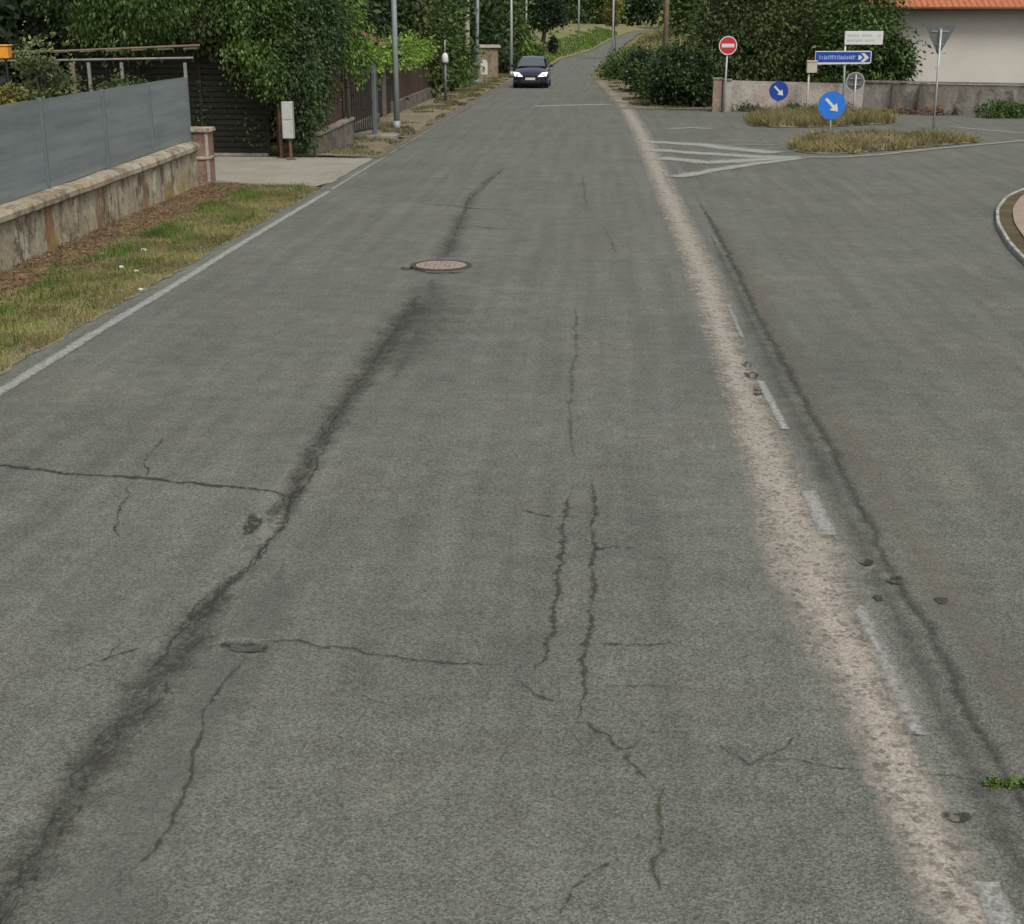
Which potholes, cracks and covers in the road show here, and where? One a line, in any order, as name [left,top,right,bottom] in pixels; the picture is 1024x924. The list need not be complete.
pothole [222,643,266,652]
manhole cover [411,260,472,271]
pothole [945,812,972,822]
crack [0,295,419,923]
crack [583,718,665,895]
crack [720,737,845,769]
pothole [243,514,262,534]
crack [273,639,484,665]
crack [522,489,670,713]
